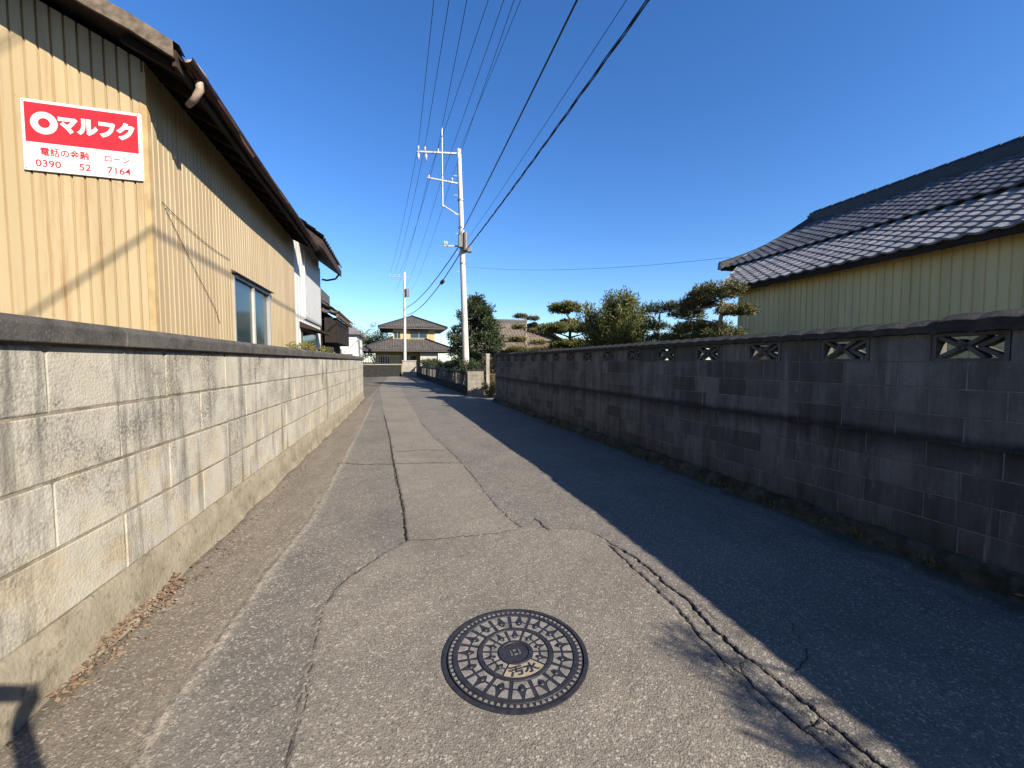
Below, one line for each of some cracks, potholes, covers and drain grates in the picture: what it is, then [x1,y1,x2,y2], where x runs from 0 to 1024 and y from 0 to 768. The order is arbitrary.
manhole cover [442,609,589,715]
crack [594,534,886,768]
crack [271,553,382,762]
